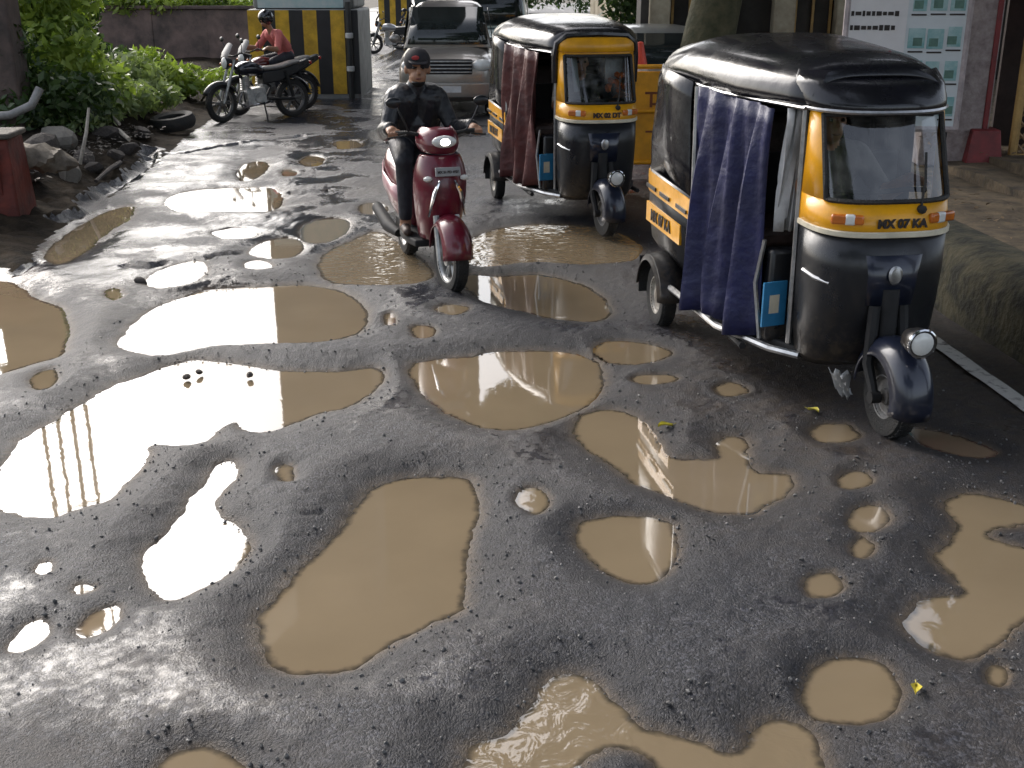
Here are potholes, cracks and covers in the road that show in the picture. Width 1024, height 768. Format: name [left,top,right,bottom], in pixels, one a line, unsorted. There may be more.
pothole [397,339,623,432]
pothole [228,459,504,682]
pothole [0,347,400,521]
pothole [879,479,1024,665]
pothole [560,503,698,588]
pothole [156,183,294,213]
pothole [469,218,655,267]
pothole [554,397,819,518]
pothole [787,639,925,727]
pothole [584,333,685,366]
pothole [0,268,90,375]
pothole [451,266,626,323]
